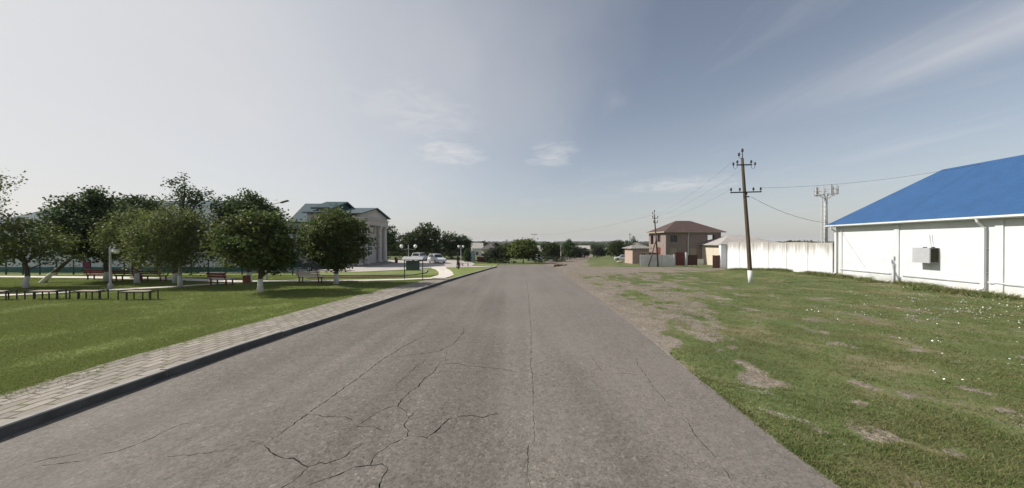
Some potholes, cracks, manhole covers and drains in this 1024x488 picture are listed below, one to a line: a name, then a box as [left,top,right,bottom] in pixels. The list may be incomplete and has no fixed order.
crack [591,355,731,479]
crack [526,281,535,484]
crack [168,333,510,488]
crack [34,421,196,466]
